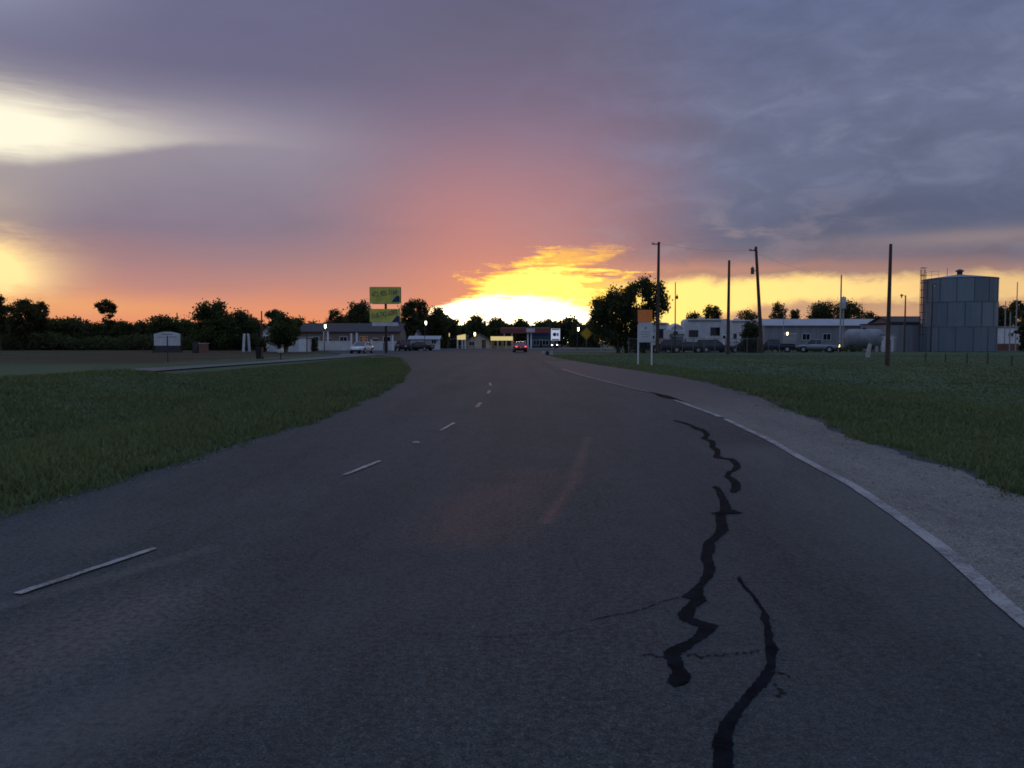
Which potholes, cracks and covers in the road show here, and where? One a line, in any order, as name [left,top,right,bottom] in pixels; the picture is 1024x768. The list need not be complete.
crack [643,650,759,658]
